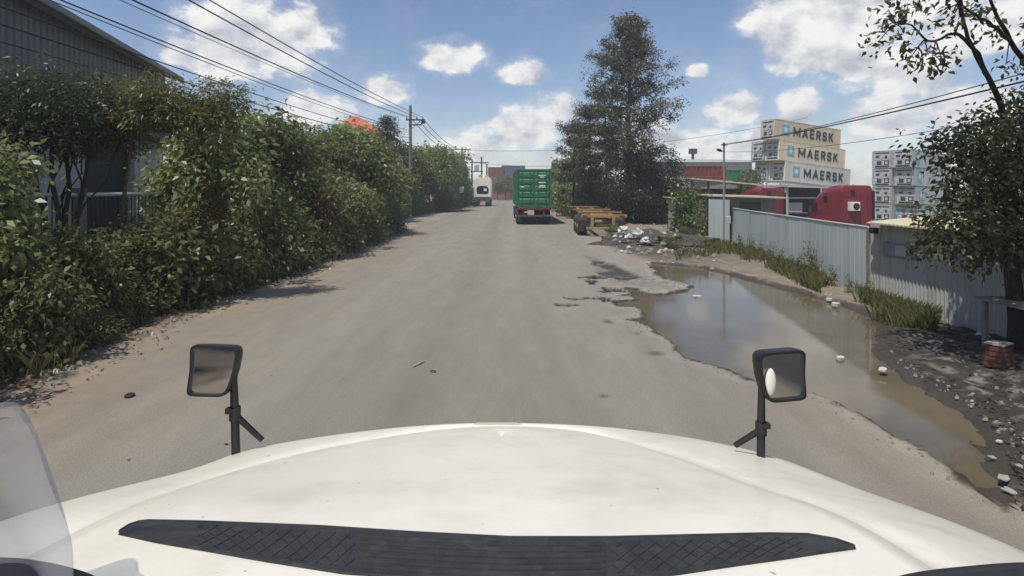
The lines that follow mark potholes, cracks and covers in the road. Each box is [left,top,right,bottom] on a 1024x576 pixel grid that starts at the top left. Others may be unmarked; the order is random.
pothole [576,253,653,285]
pothole [608,262,1024,518]
